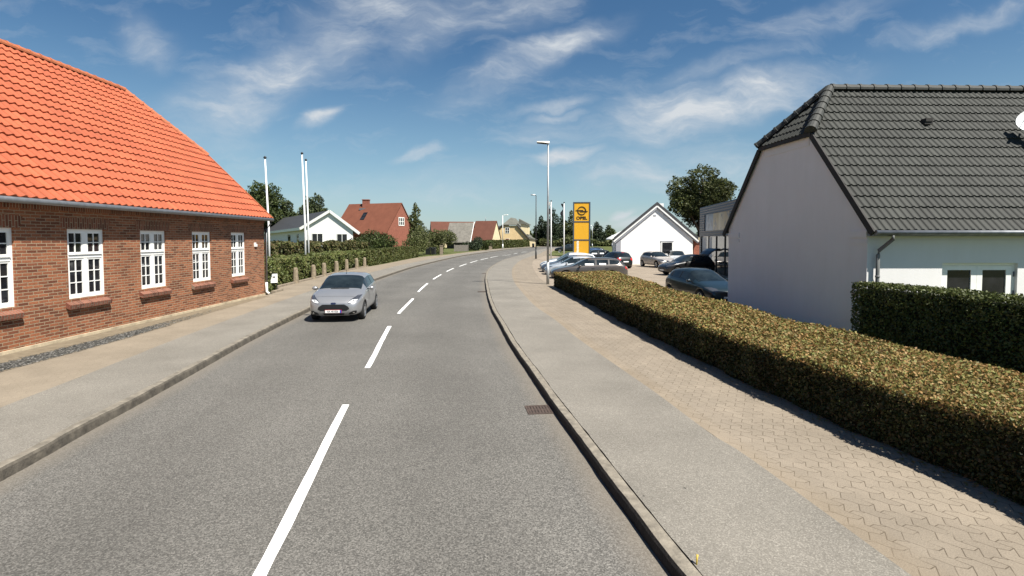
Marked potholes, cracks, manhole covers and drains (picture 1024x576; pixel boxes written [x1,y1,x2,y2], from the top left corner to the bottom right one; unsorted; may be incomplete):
drain grate [525,405,554,415]
